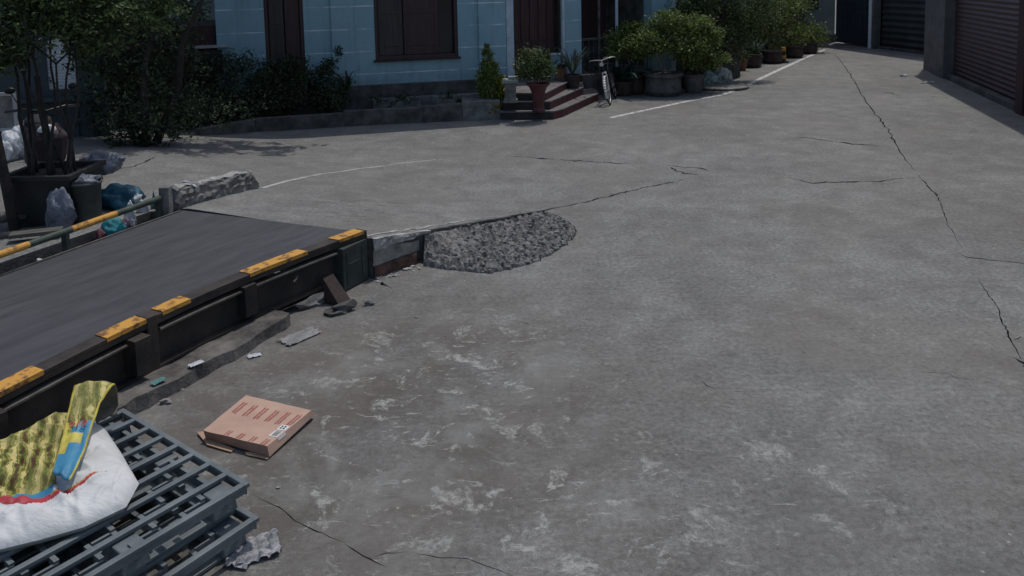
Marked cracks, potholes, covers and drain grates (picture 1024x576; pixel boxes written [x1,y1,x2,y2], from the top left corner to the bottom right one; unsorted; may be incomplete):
crack [378,551,512,576]
pothole [423,210,577,274]
crack [560,165,709,208]
crack [506,155,624,164]
